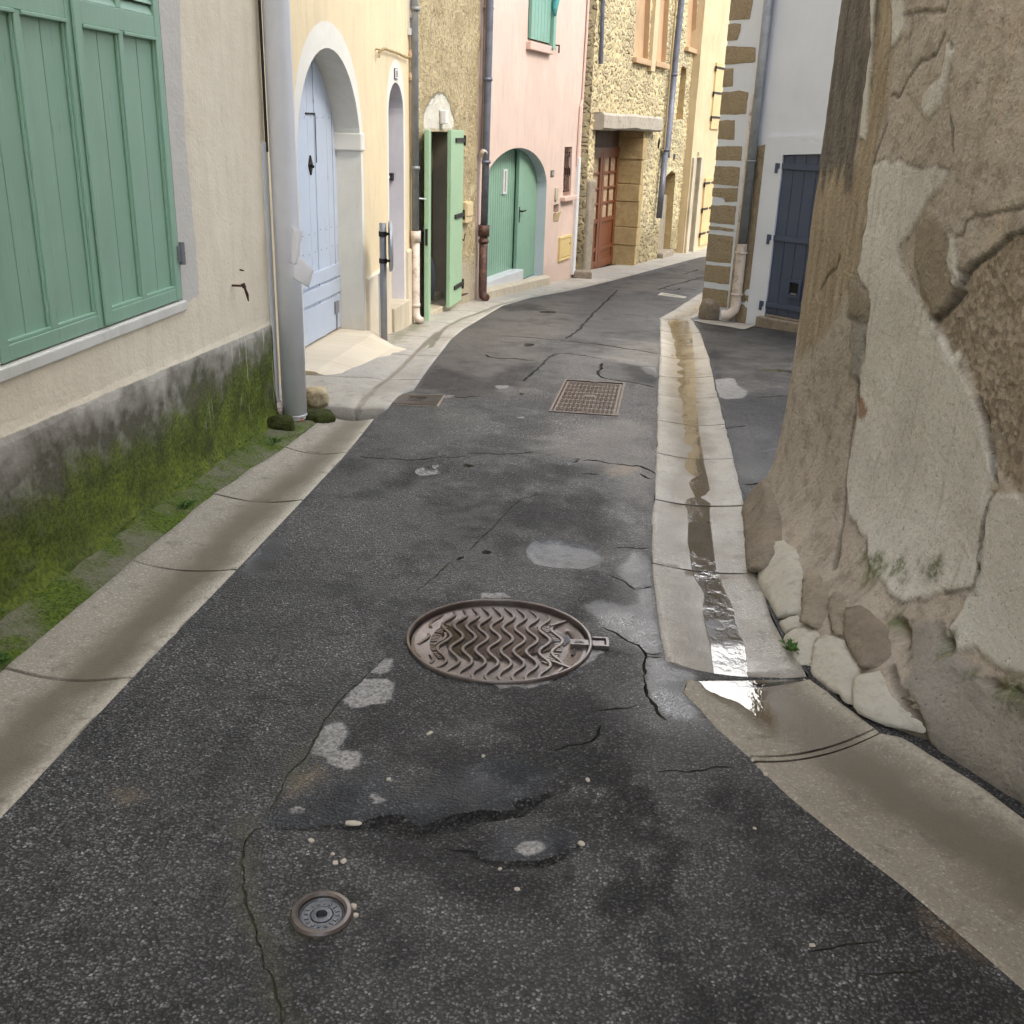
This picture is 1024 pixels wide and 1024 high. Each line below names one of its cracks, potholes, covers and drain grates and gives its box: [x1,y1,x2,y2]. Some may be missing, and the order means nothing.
pothole [278,789,554,841]
pothole [473,844,582,870]
crack [553,627,667,751]
utility cover [290,890,353,938]
manhole cover [391,393,446,407]
crack [486,353,653,387]
manhole cover [406,599,609,685]
